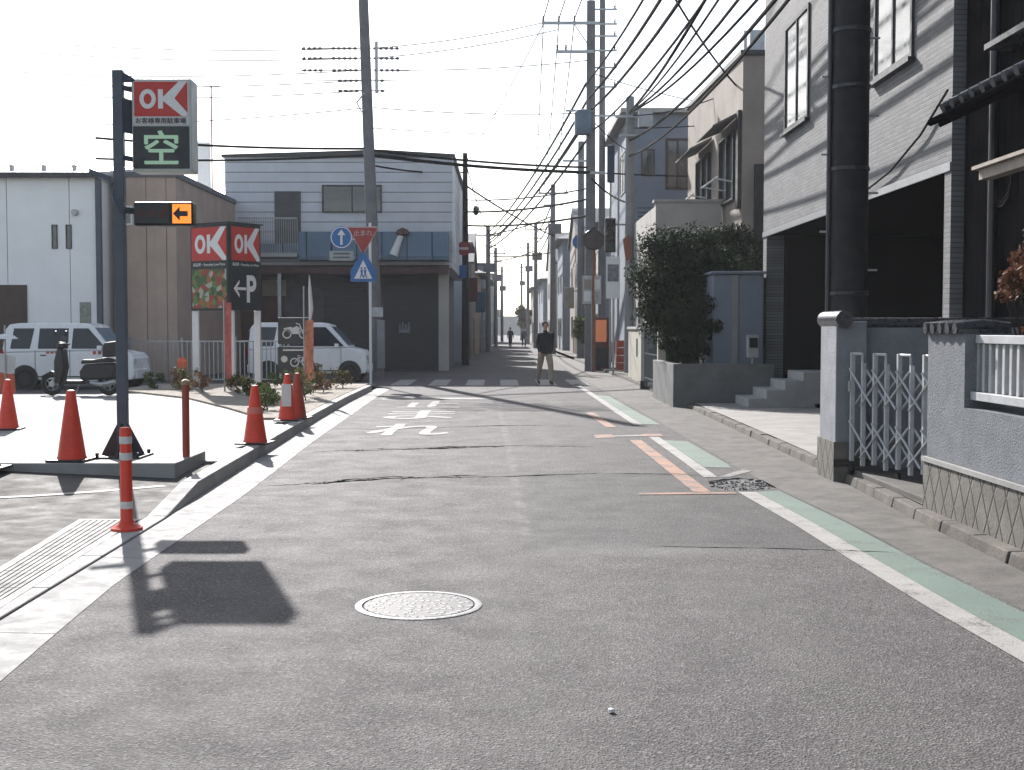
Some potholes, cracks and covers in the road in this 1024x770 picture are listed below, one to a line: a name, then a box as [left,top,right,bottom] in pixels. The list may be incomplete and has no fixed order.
manhole cover [355,591,482,620]
crack [273,473,699,486]
